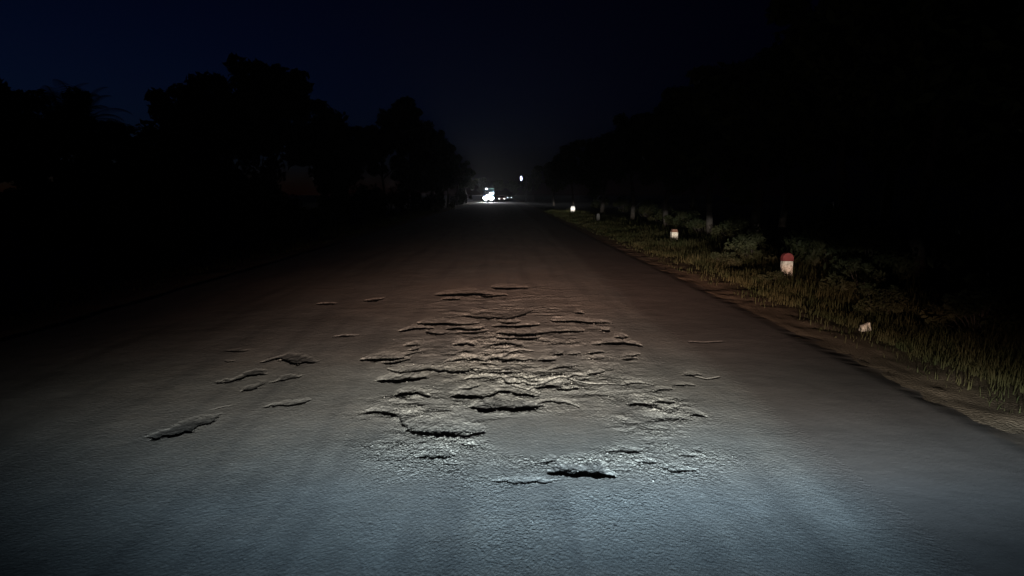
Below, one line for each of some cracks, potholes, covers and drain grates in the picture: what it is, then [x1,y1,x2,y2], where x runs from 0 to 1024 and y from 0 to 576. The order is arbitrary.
pothole [142,413,224,441]
pothole [268,373,302,383]
pothole [414,446,456,460]
pothole [535,398,580,408]
pothole [450,387,539,399]
pothole [546,460,617,479]
pothole [214,368,269,384]
pothole [263,398,312,408]
pothole [359,353,405,362]
pothole [496,328,548,337]
pothole [469,397,544,413]
pothole [491,476,558,485]
